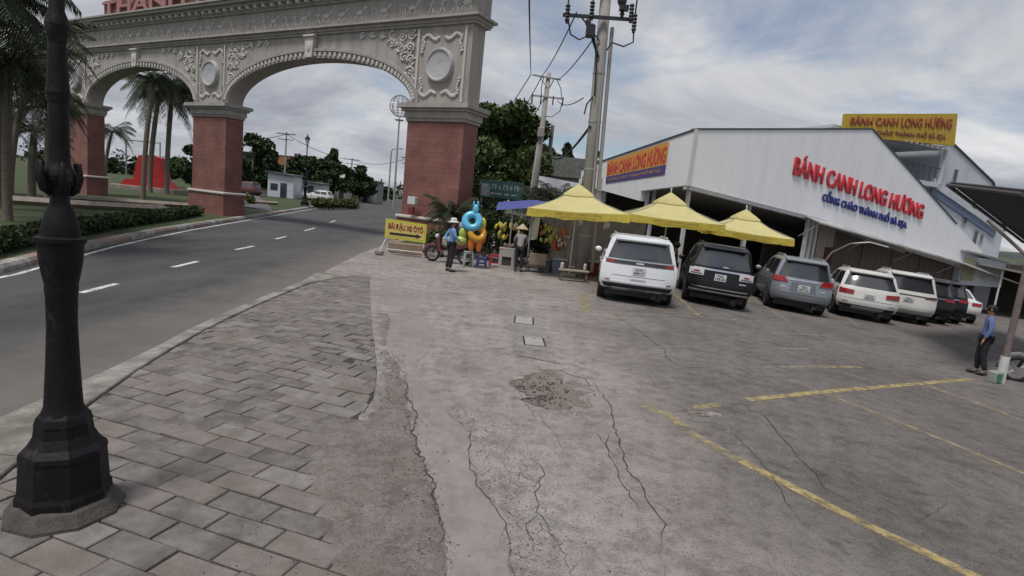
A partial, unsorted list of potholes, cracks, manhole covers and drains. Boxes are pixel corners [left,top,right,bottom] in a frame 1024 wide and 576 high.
manhole cover [514,316,534,325]
crack [462,405,576,576]
crack [401,369,452,574]
crack [604,309,880,541]
pothole [509,368,596,416]
manhole cover [522,336,546,347]
pothole [679,409,722,418]
crack [588,376,672,568]
